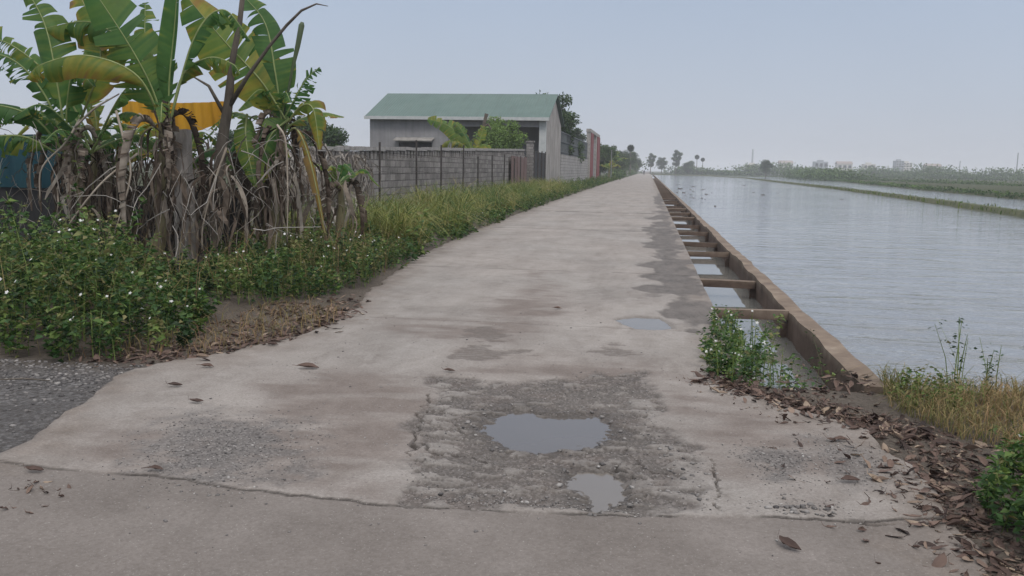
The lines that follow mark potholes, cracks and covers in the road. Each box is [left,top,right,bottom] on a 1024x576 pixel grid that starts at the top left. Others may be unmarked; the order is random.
pothole [474,406,619,455]
crack [710,458,722,511]
pothole [561,465,633,514]
